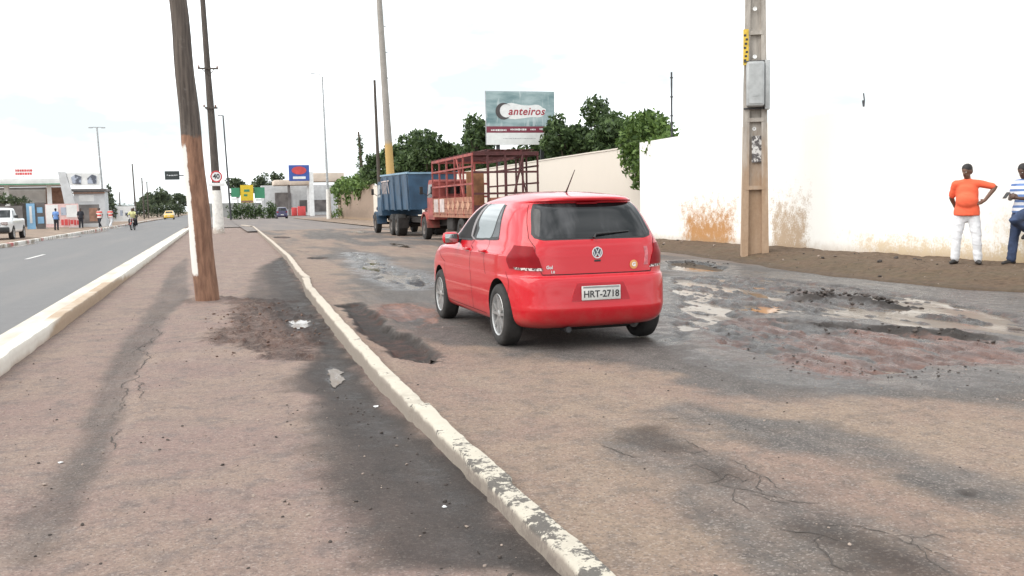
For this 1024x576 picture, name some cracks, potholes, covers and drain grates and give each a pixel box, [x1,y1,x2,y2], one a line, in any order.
pothole [661,274,1024,342]
crack [781,524,956,573]
pothole [665,260,729,271]
crack [682,440,807,512]
pothole [349,252,434,289]
pothole [334,302,447,364]
crack [112,310,167,421]
